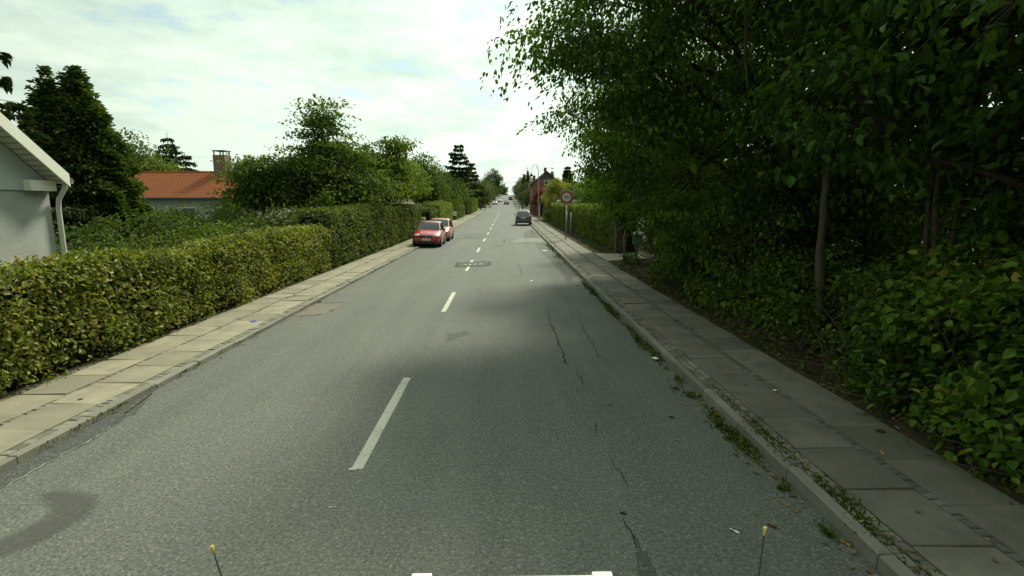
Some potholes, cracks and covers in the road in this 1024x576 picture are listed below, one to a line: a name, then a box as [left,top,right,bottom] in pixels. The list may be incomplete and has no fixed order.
crack [622,517,641,552]
crack [546,304,588,389]
